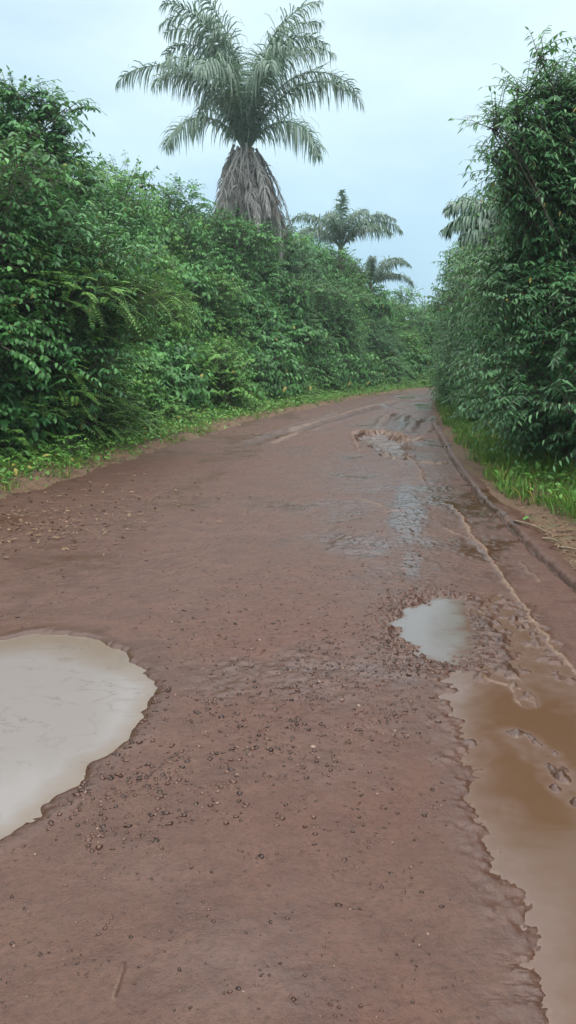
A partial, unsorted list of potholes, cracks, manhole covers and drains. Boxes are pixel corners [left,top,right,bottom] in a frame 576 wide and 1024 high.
pothole [425,595,576,1024]
pothole [377,590,498,673]
pothole [0,627,166,847]
pothole [351,429,414,461]
